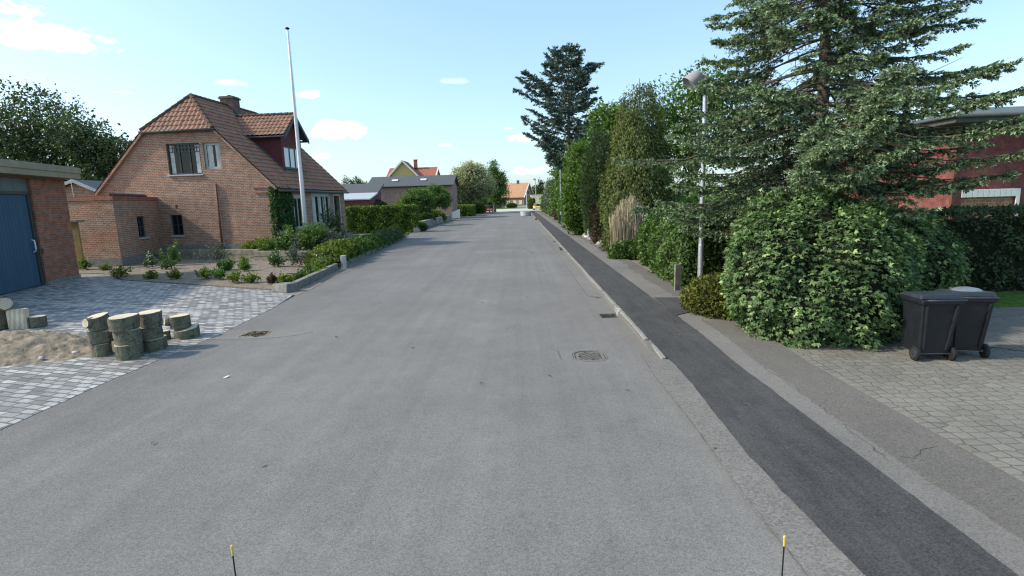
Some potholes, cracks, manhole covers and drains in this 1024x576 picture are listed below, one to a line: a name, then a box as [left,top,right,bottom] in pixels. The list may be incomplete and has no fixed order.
manhole cover [573,350,608,362]
